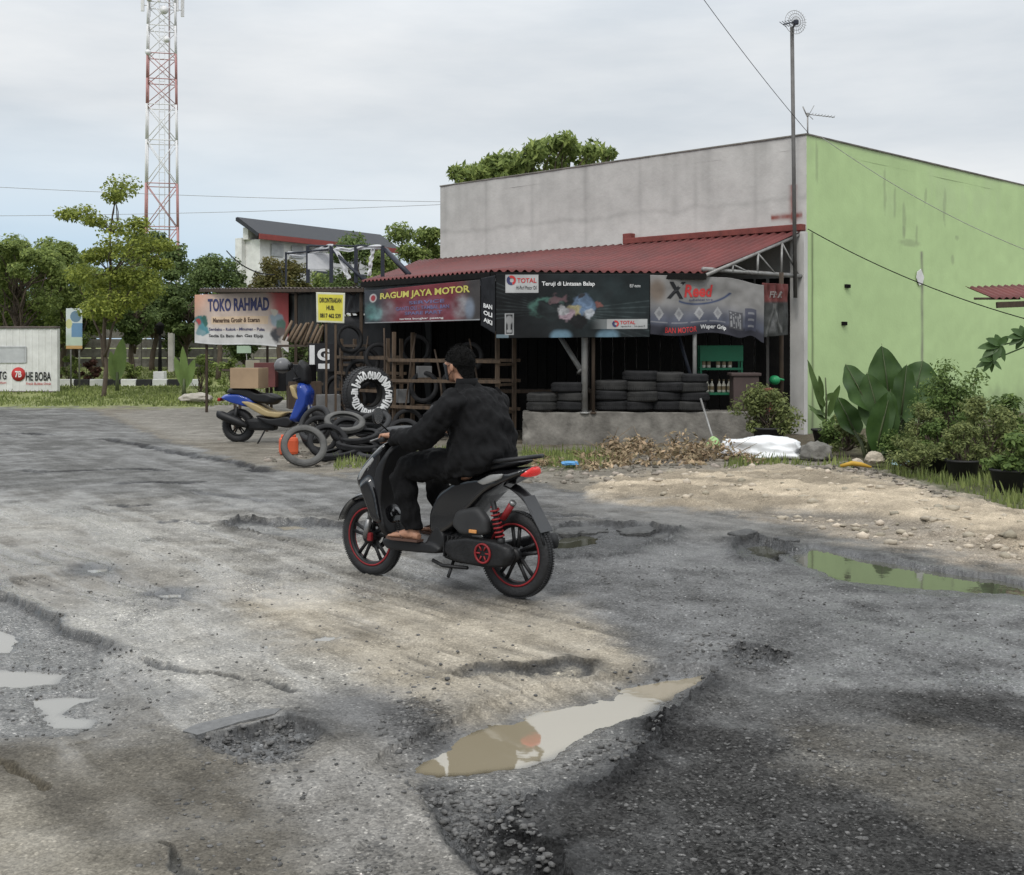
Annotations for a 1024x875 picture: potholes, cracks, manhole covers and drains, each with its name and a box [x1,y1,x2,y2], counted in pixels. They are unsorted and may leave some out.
pothole [549,520,681,558]
pothole [0,587,155,749]
pothole [729,532,794,564]
pothole [190,711,333,769]
pothole [778,543,1024,603]
pothole [437,654,601,681]
pothole [724,640,797,670]
crack [142,656,300,693]
pothole [386,674,718,875]
crack [157,841,206,875]
